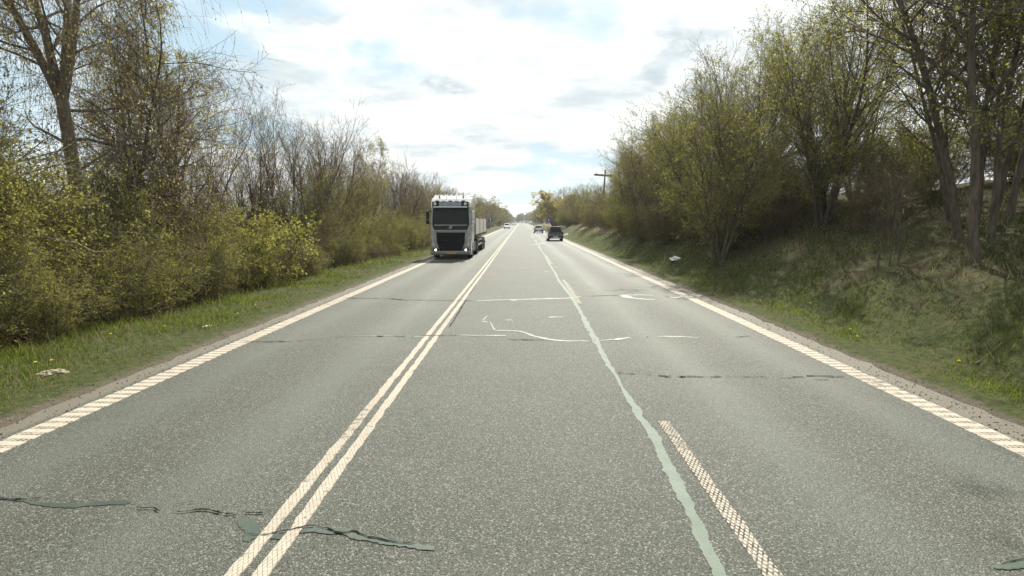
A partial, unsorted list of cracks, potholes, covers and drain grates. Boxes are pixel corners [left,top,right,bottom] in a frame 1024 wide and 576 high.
crack [0,497,436,550]
